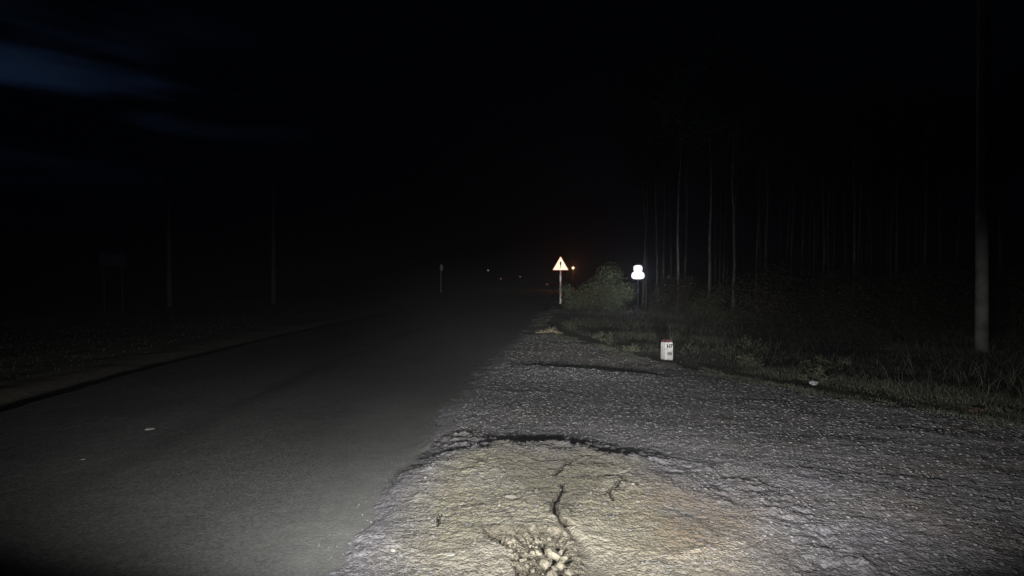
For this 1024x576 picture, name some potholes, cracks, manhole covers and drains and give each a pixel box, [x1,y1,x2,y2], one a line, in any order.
pothole [479,524,585,576]
crack [549,458,627,527]
